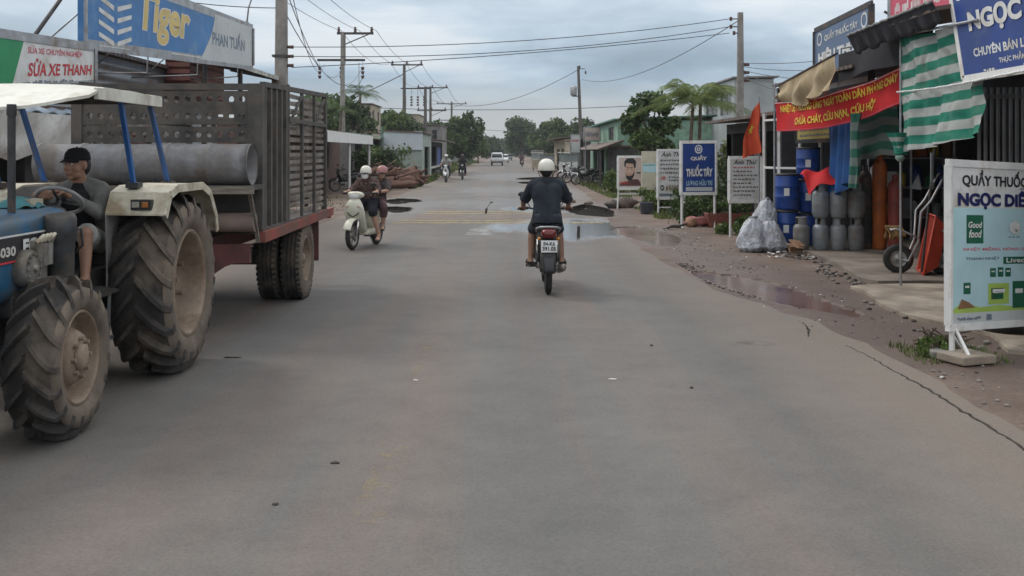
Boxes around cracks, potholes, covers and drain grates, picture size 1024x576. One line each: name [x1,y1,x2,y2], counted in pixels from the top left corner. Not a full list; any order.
pothole [568,204,615,217]
crack [845,345,1024,451]
